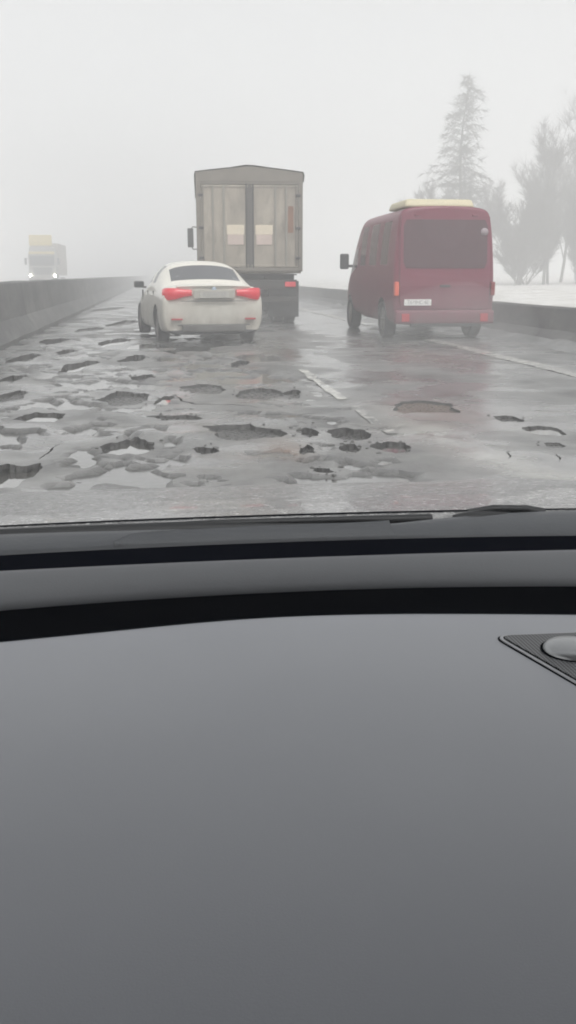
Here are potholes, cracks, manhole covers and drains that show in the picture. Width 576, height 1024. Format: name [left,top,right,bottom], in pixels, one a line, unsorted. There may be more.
pothole [193,447,219,455]
pothole [0,463,43,488]
pothole [180,384,226,394]
pothole [202,423,287,441]
pothole [96,391,150,406]
pothole [235,388,284,401]
pothole [100,437,155,455]
pothole [13,412,65,422]
pothole [283,390,301,399]
pothole [370,441,411,453]
pothole [522,426,567,436]
pothole [393,400,460,413]
